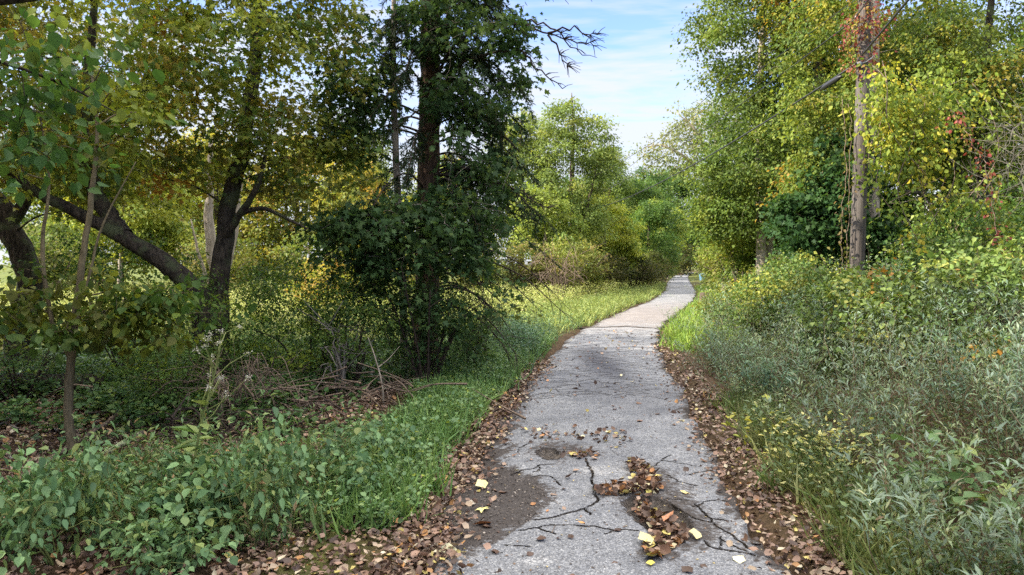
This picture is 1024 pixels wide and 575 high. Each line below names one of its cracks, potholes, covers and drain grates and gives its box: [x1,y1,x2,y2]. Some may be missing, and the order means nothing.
pothole [620,494,694,554]
crack [511,442,561,486]
crack [504,458,639,547]
pothole [534,448,561,460]
crack [654,455,755,556]
